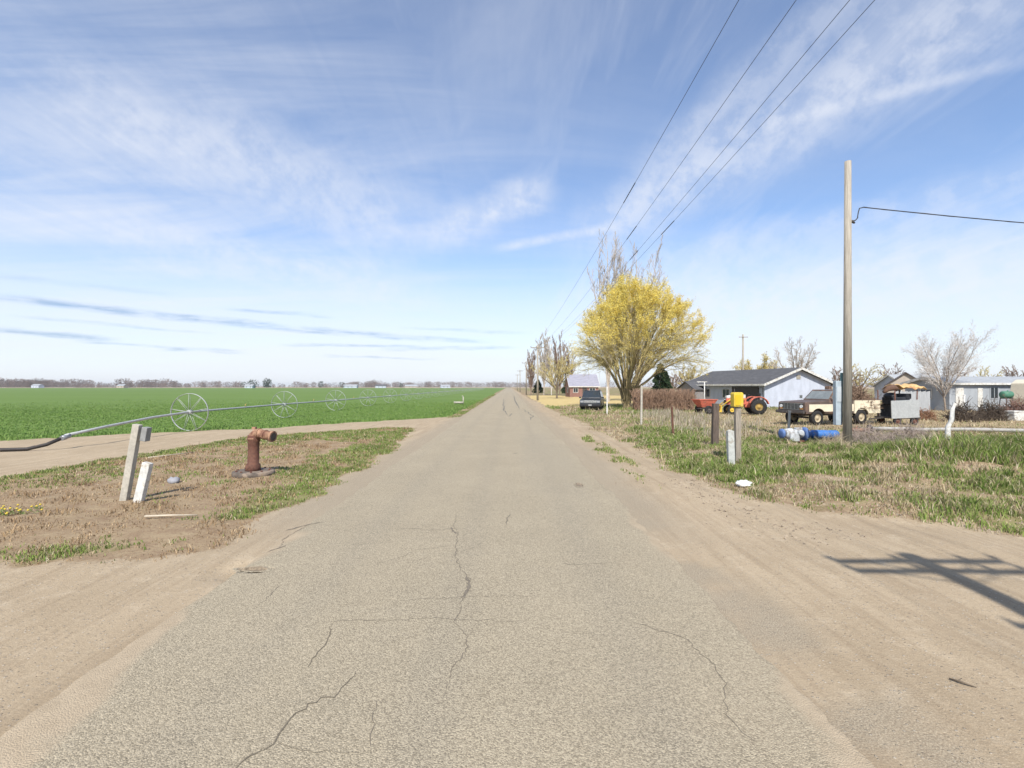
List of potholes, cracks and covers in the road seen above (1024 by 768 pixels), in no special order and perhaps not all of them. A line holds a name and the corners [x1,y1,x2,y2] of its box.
crack [236,671,360,768]
crack [630,620,752,739]
crack [309,516,521,707]
